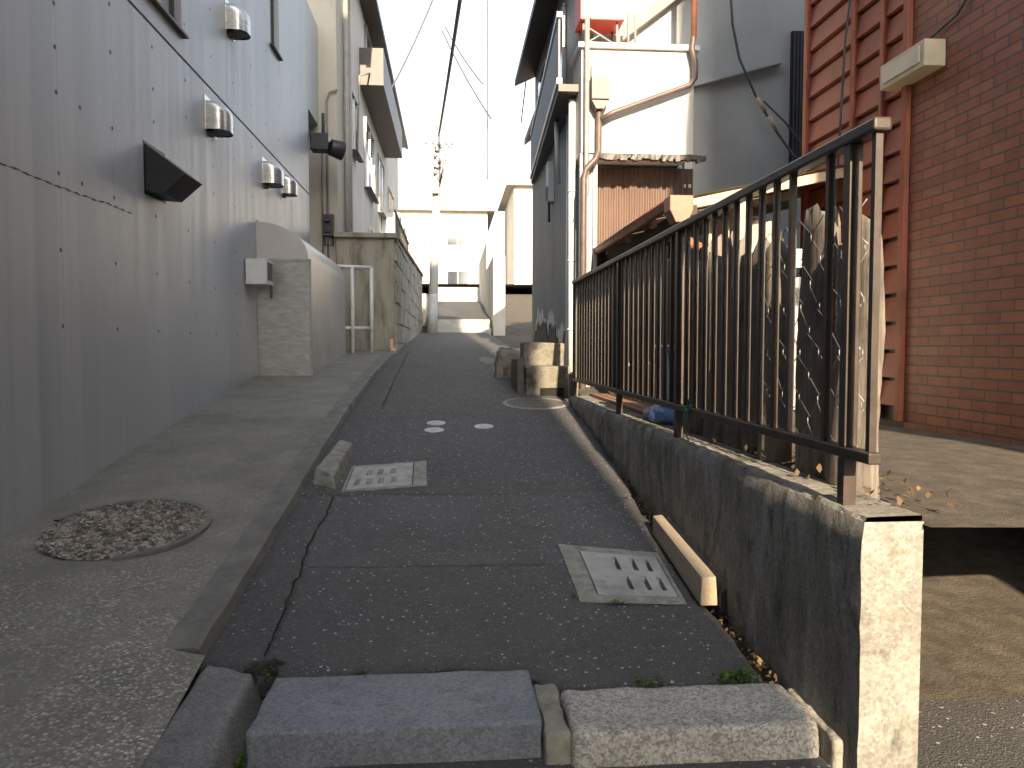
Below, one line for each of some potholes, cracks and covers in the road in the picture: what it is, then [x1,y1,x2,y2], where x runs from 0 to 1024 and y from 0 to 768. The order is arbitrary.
manhole cover [502,398,570,410]
